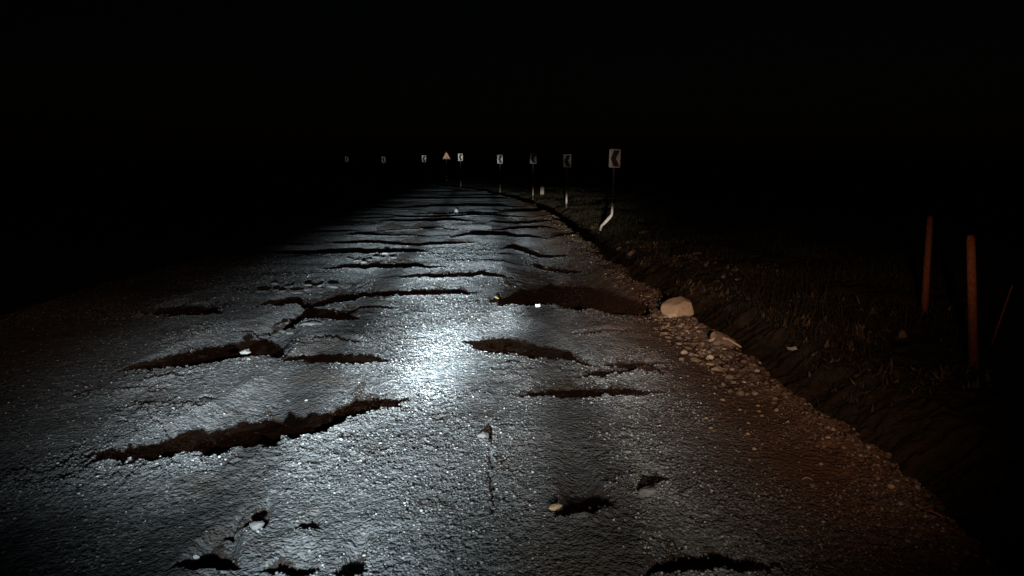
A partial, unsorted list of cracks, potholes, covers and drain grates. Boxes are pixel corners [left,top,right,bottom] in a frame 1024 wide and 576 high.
pothole [495,246,652,317]
